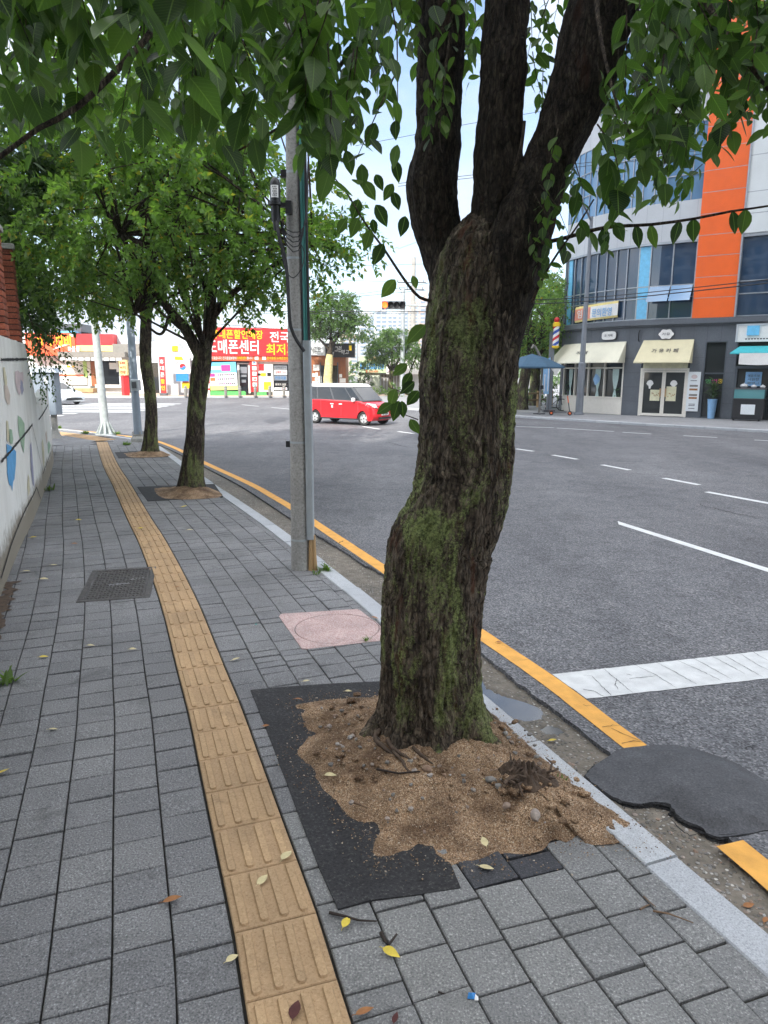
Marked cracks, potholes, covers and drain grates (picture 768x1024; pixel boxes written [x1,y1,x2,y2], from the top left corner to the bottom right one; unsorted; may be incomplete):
manhole cover [279,609,381,651]
manhole cover [76,566,156,603]
